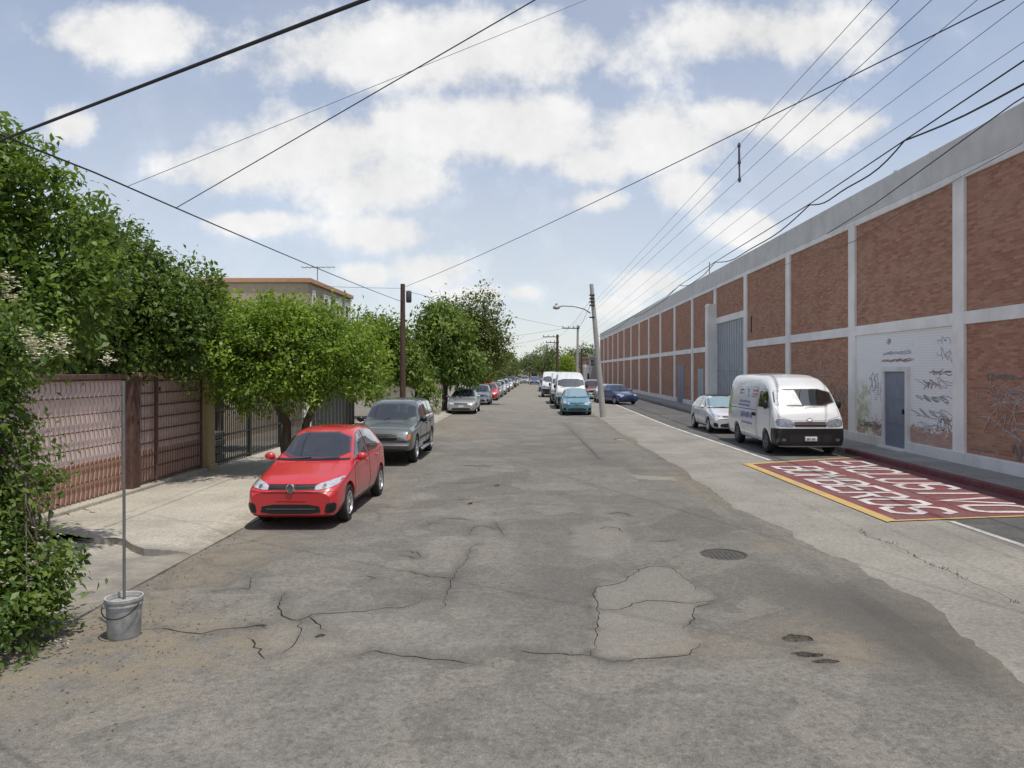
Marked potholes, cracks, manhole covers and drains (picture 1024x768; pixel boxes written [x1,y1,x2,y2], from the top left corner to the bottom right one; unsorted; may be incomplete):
crack [167,597,321,658]
manhole cover [700,549,748,560]
